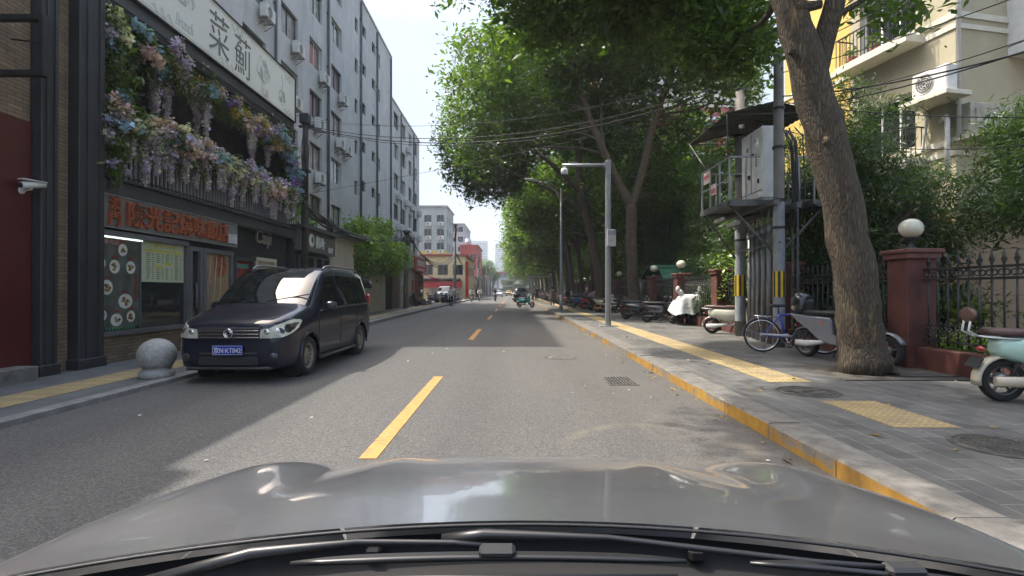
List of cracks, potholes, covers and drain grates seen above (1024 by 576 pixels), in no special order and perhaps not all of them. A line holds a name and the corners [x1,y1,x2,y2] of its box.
manhole cover [946,433,1024,459]
drain grate [602,376,639,385]
manhole cover [775,386,843,398]
